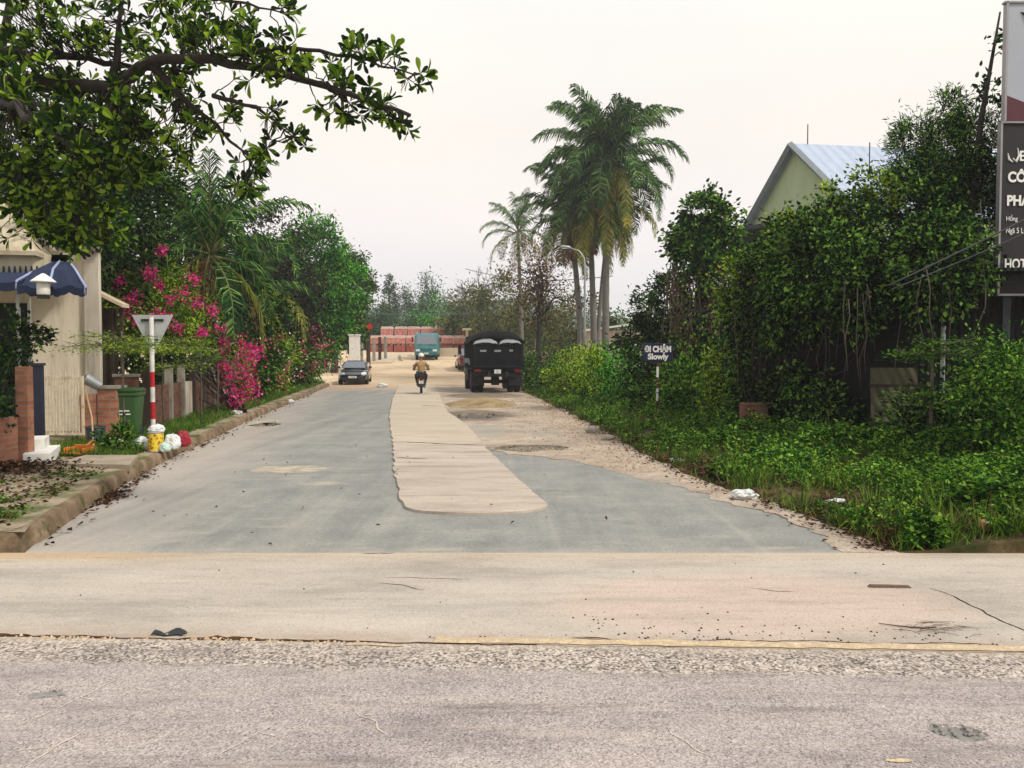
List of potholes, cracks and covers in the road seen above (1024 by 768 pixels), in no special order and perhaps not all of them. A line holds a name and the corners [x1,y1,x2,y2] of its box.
crack [934,589,1024,630]
pothole [494,444,569,452]
pothole [924,723,989,742]
crack [352,706,390,737]
